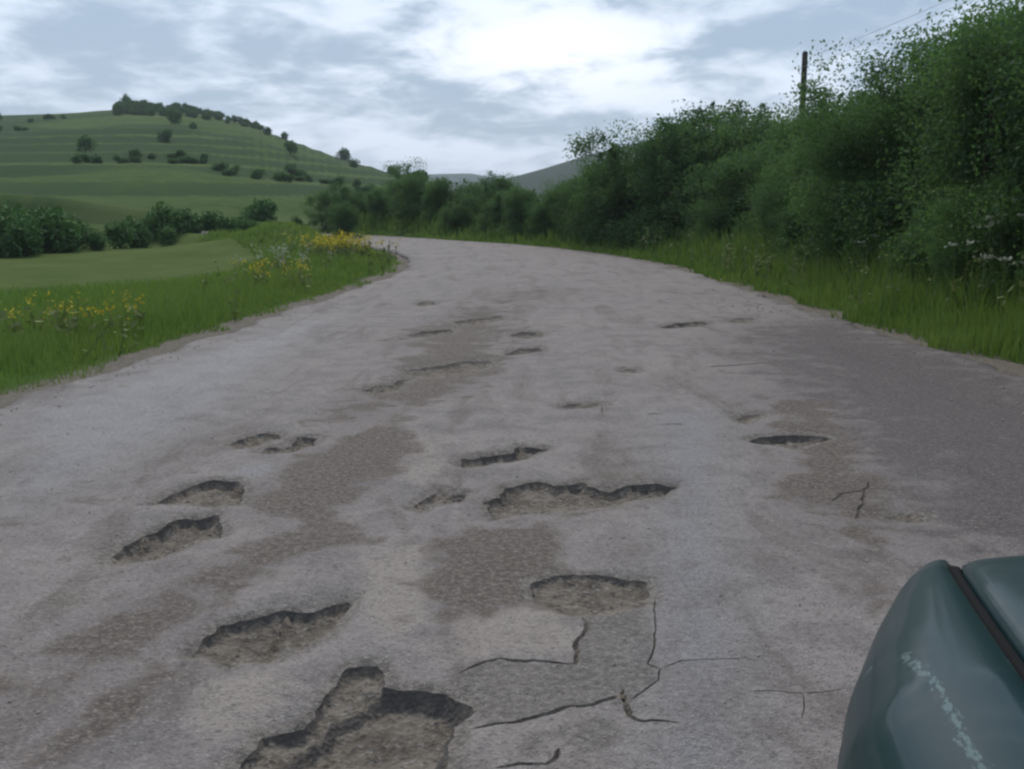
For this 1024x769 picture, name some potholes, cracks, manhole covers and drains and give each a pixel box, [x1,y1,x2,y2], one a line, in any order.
pothole [239,666,474,769]
crack [459,600,755,729]
pothole [151,480,245,507]
crack [495,748,561,768]
pothole [749,435,831,449]
pothole [529,575,651,617]
pothole [504,347,543,356]
pothole [365,380,408,394]
pothole [261,436,316,454]
crack [832,481,870,519]
pothole [413,492,467,514]
pothole [108,515,222,565]
